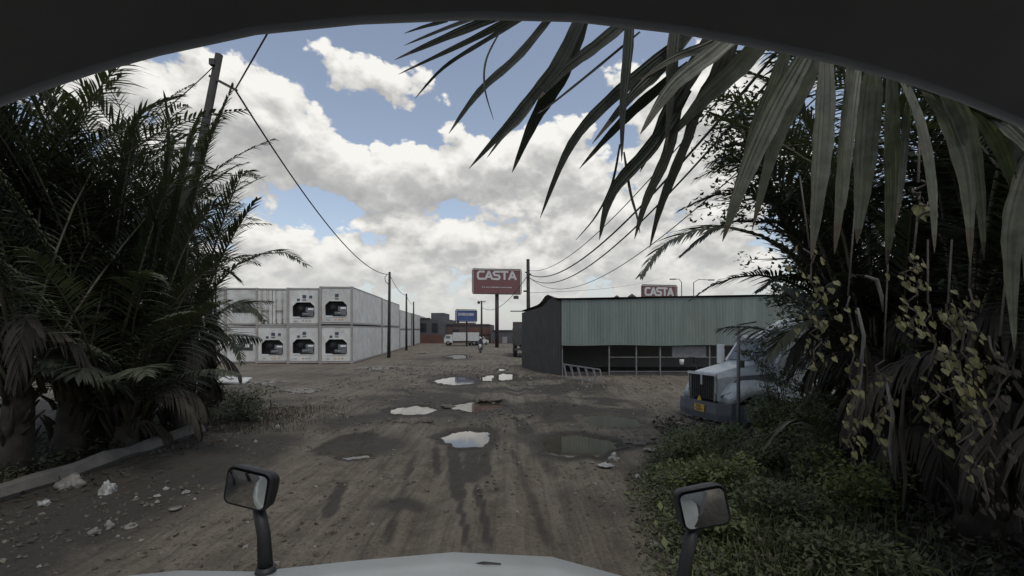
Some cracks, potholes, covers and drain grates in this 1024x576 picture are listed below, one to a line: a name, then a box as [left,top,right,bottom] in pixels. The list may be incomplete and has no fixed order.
pothole [494,372,518,381]
pothole [532,431,632,460]
pothole [572,412,652,429]
pothole [428,376,482,386]
pothole [433,428,495,450]
pothole [313,431,378,456]
pothole [334,453,378,462]
pothole [446,400,509,413]
pothole [383,404,446,417]
